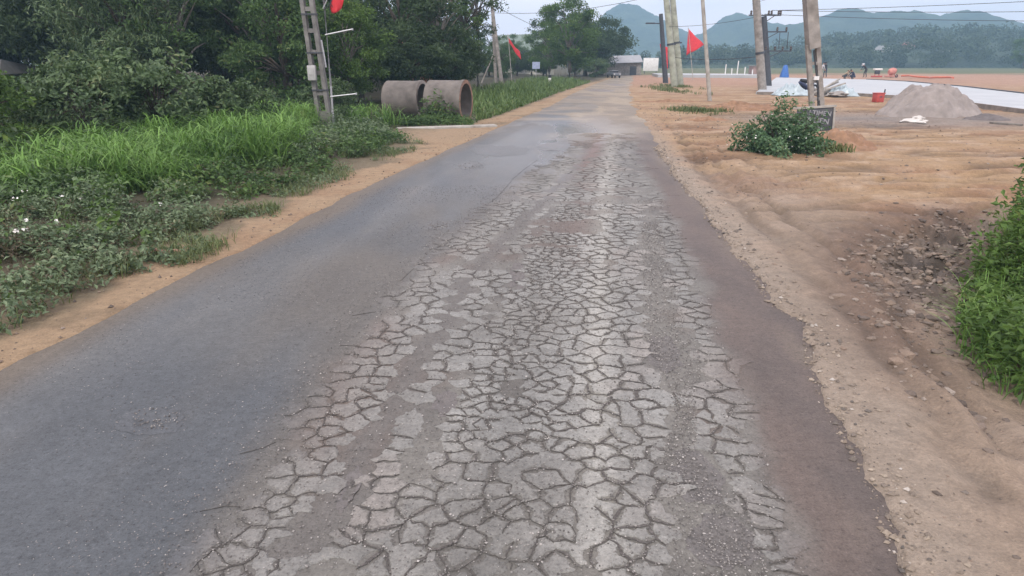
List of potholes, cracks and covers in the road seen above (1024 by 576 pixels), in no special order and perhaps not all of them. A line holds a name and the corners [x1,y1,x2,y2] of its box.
crack [736,484,808,576]
crack [197,133,770,576]
pothole [114,407,185,435]
